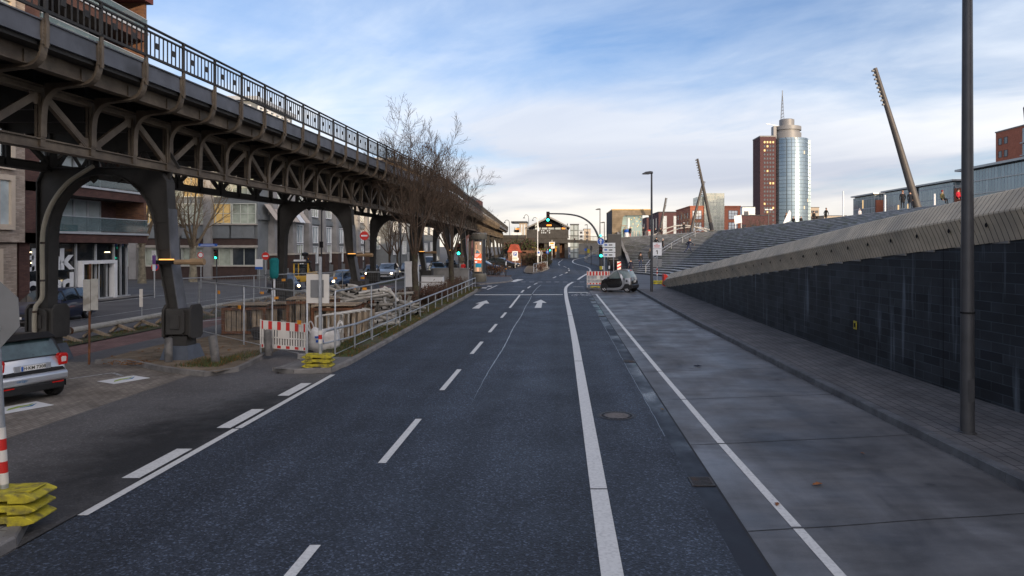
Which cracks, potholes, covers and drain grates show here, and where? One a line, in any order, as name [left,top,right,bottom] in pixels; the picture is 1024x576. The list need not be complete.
manhole cover [597,411,637,421]
drain grate [688,477,716,486]
